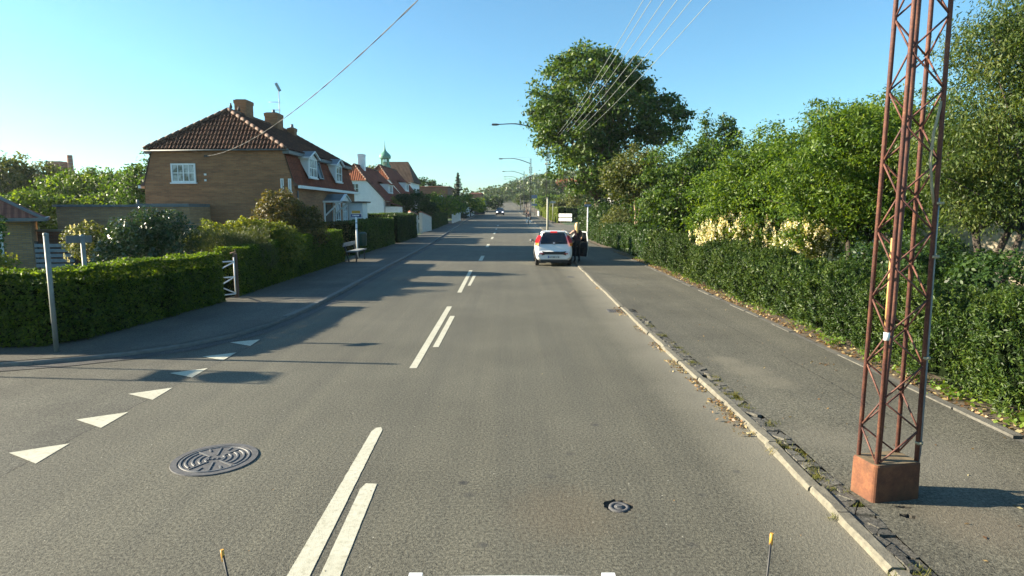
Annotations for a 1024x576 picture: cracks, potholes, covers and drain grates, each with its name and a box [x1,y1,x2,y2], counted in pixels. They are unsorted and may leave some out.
utility cover [608,502,630,513]
manhole cover [169,443,259,477]
